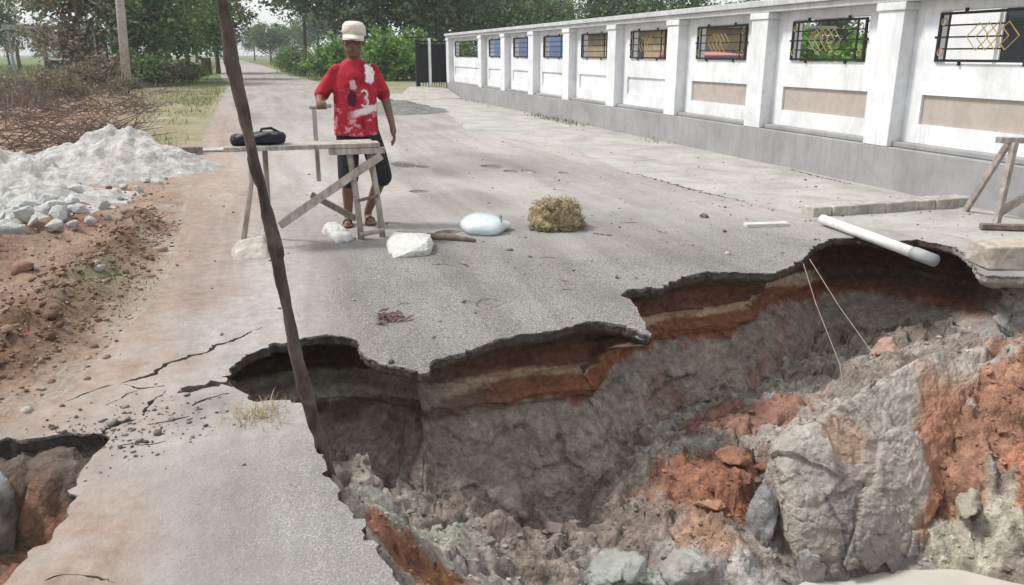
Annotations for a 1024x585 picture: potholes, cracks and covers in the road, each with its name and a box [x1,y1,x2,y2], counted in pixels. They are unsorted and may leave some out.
crack [45,574,115,583]
pothole [0,432,110,585]
crack [65,325,268,446]
